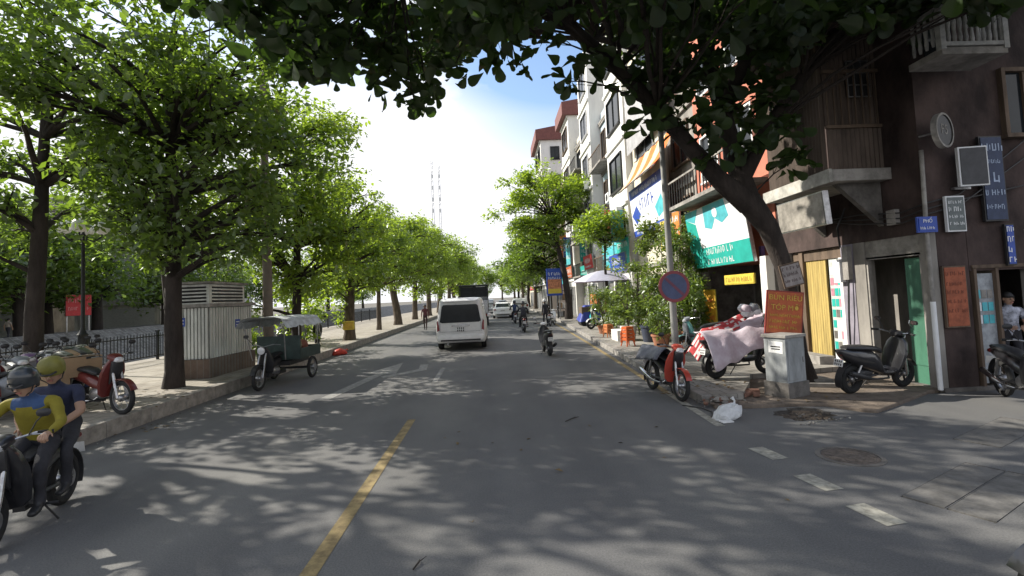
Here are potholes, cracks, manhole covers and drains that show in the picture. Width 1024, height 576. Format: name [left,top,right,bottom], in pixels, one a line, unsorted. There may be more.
pothole [774,407,839,421]
manhole cover [815,446,888,467]
